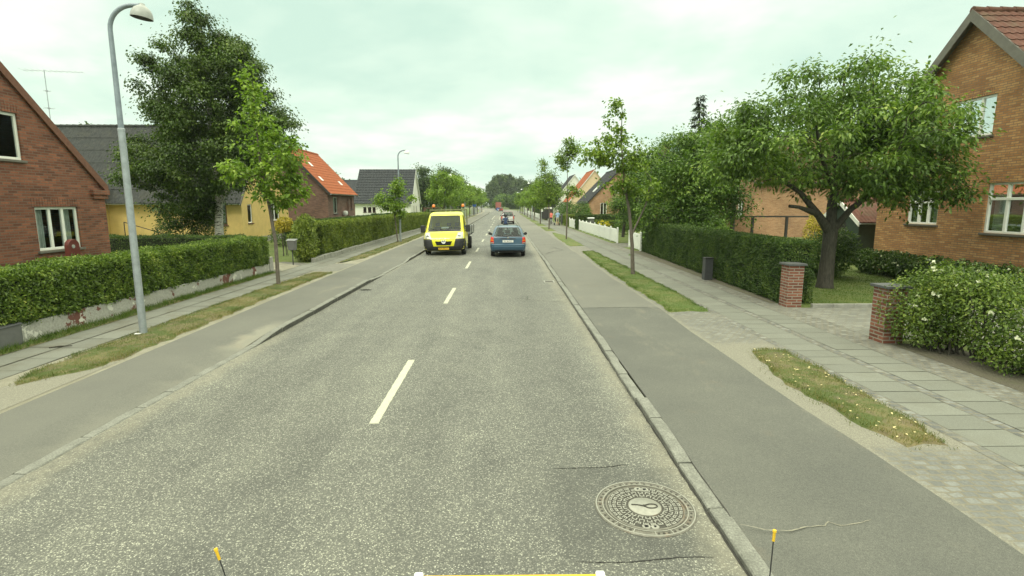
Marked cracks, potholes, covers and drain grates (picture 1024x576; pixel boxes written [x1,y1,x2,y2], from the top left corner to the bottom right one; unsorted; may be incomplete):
crack [741,520,868,531]
manhole cover [595,481,697,538]
